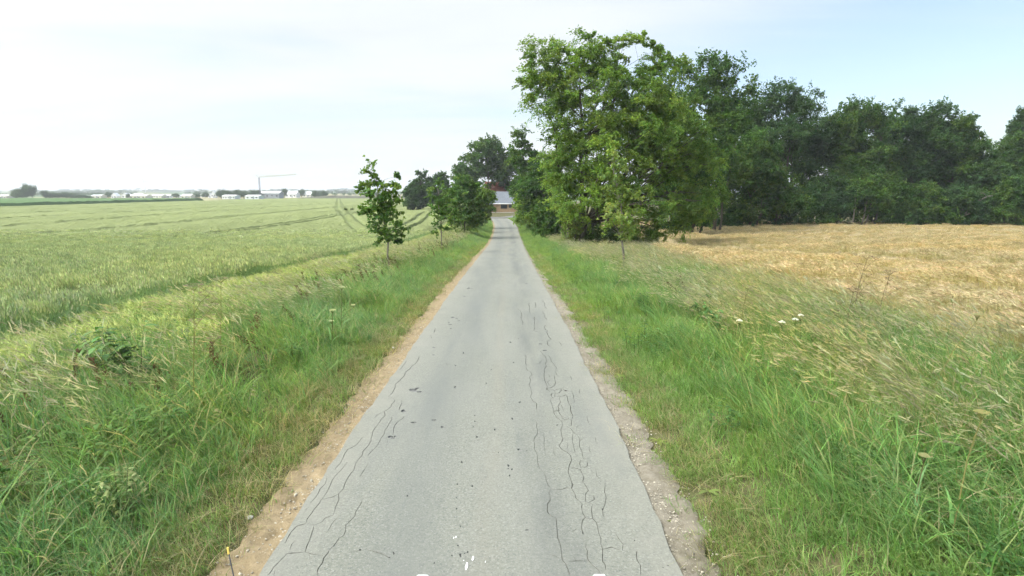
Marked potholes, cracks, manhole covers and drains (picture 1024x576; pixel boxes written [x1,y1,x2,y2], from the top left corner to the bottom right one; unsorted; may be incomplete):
crack [521,302,641,575]
crack [268,358,419,575]
